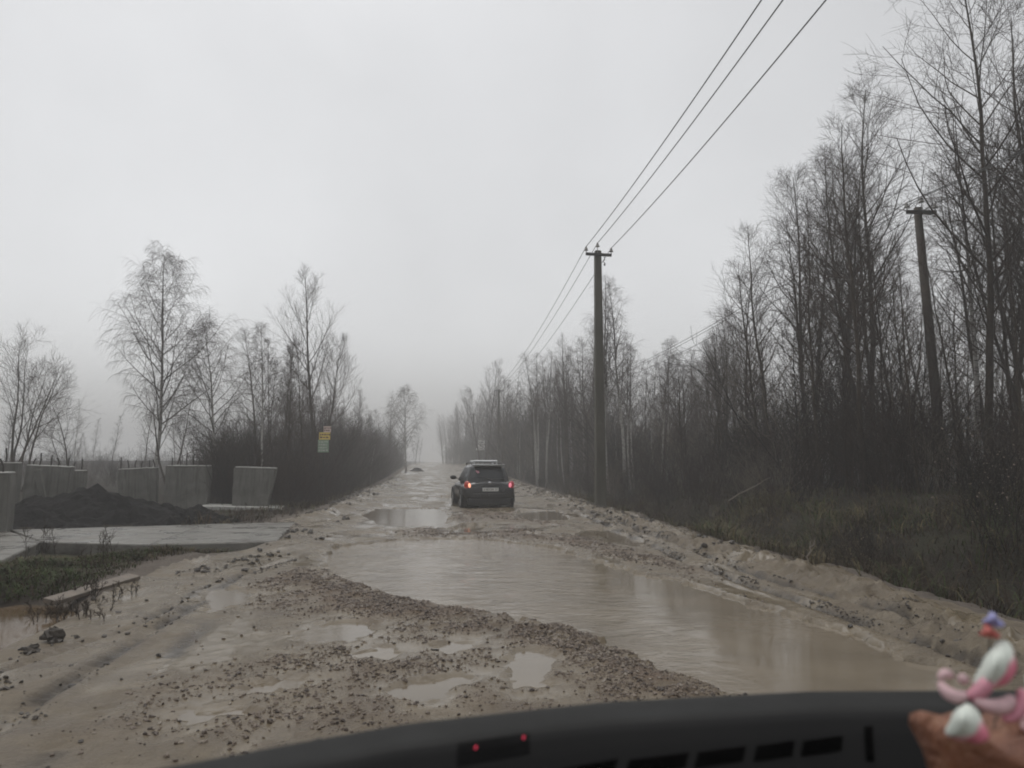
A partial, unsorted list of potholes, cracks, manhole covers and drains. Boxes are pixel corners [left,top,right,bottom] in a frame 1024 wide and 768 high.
pothole [515,510,570,521]
pothole [288,622,378,644]
pothole [321,538,973,694]
pothole [193,583,256,612]
pothole [359,508,450,528]
pothole [386,675,476,704]
